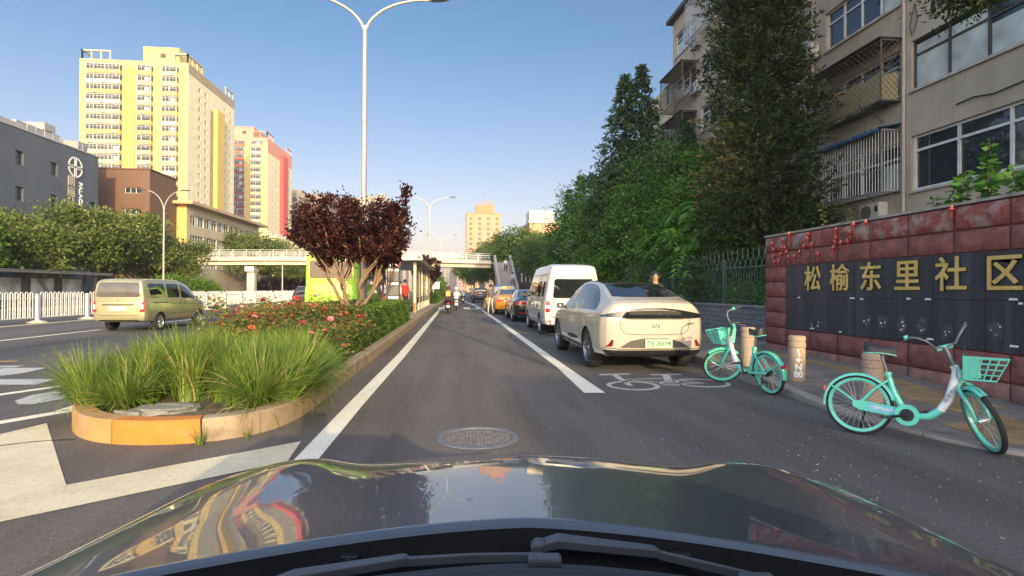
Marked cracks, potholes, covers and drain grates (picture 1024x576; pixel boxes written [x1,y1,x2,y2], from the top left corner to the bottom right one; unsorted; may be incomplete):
manhole cover [436,427,519,450]
